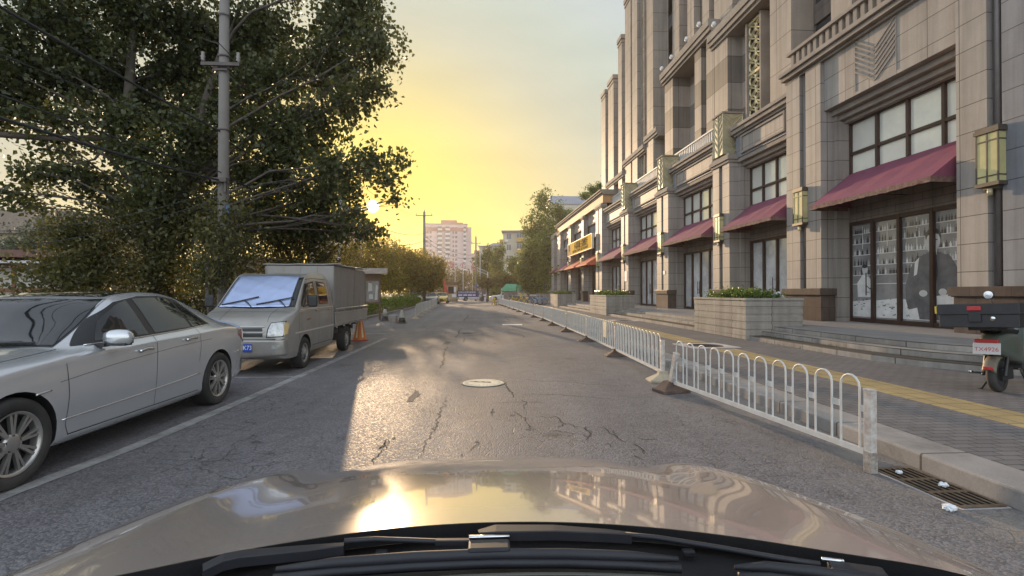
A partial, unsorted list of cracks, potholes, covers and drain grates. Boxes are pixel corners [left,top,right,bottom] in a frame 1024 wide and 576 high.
drain grate [878,466,1011,510]
manhole cover [461,379,505,387]
crack [505,378,651,460]
